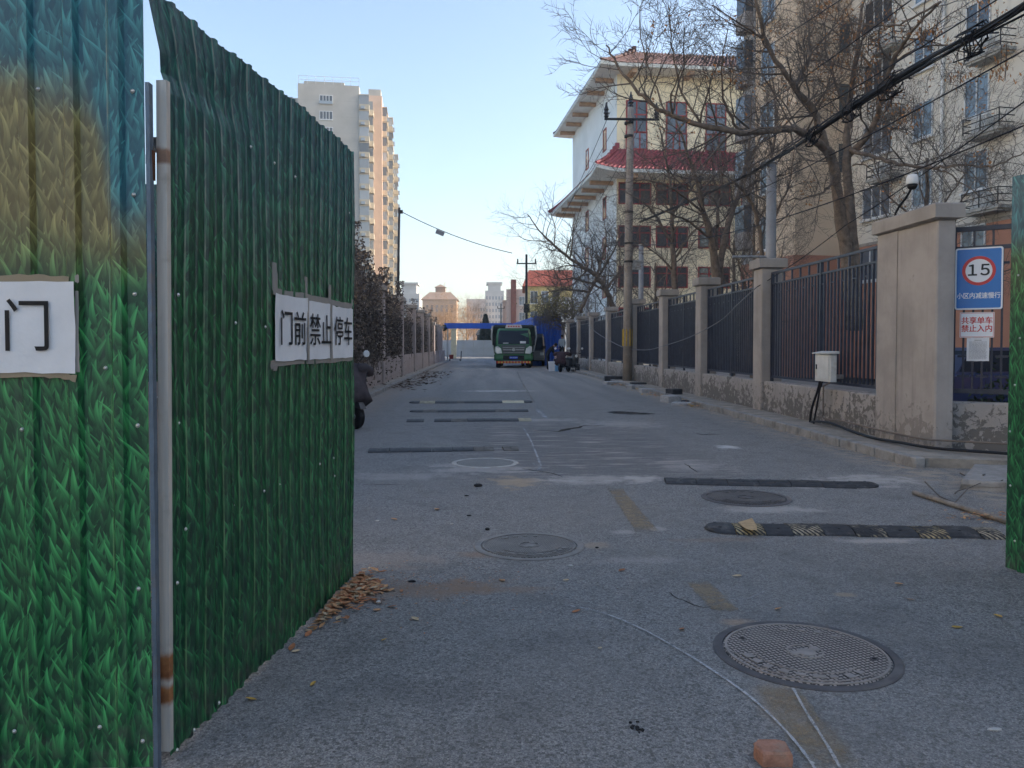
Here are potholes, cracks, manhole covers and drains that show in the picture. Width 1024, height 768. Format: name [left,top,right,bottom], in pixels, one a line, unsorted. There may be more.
manhole cover [452,458,518,468]
manhole cover [474,532,584,561]
manhole cover [701,489,793,507]
manhole cover [713,621,905,692]
